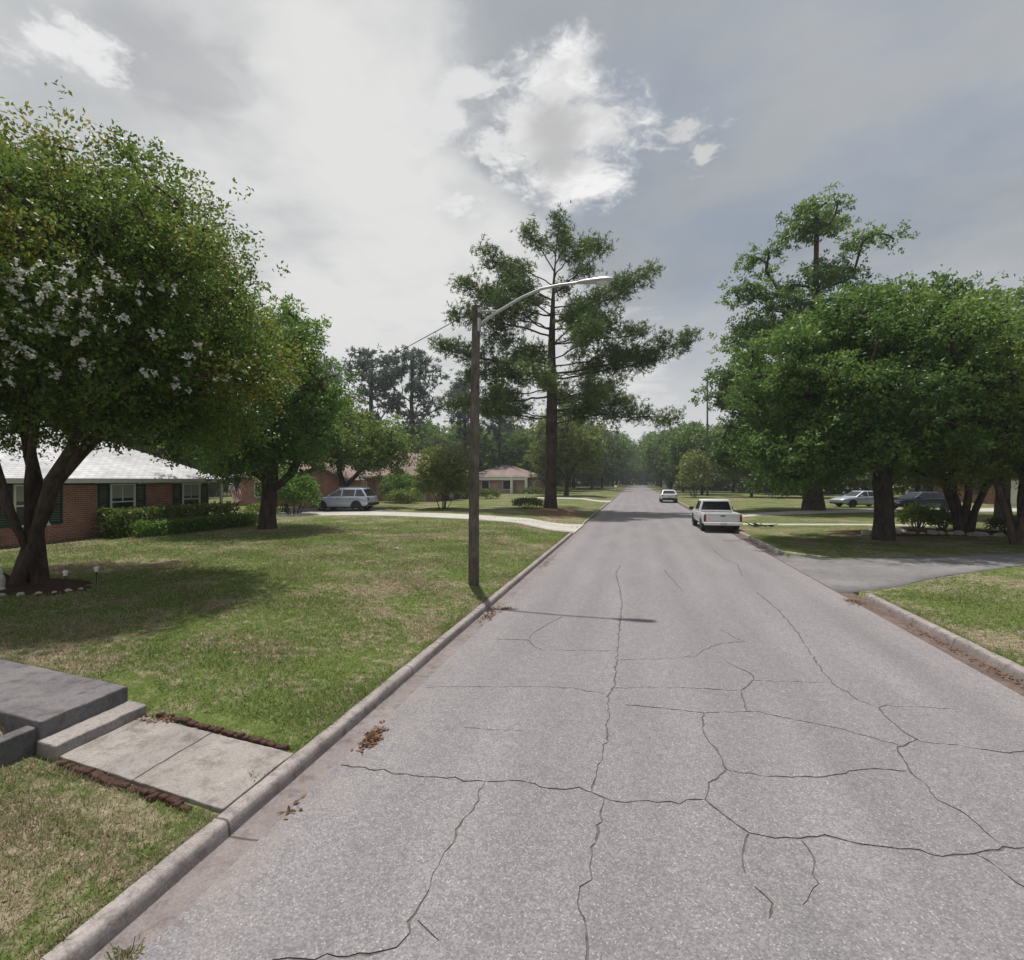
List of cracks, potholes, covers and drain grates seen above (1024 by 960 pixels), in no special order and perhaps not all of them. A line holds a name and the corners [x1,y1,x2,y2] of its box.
crack [272,565,1024,960]
